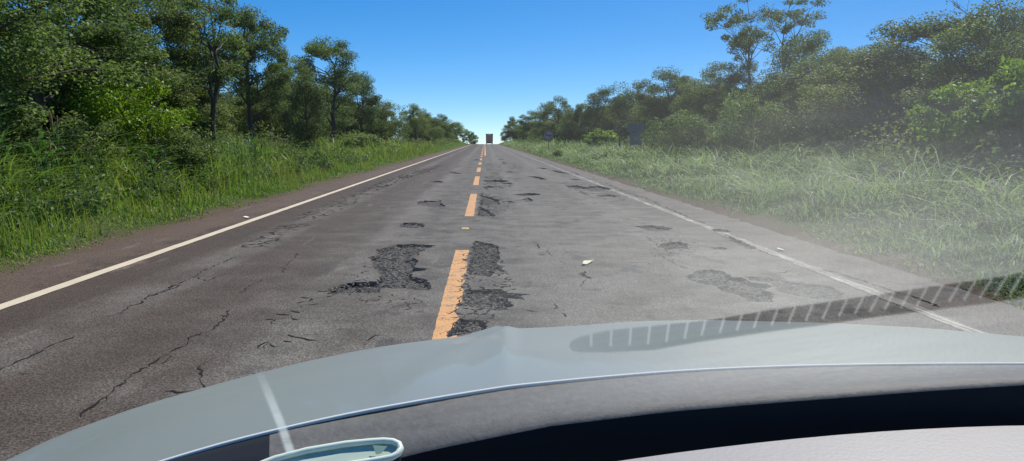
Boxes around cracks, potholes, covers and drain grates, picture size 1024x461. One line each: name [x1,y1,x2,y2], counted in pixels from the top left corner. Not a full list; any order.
crack [257,265,425,348]
pothole [463,289,531,310]
pothole [658,242,689,250]
crack [80,310,230,416]
pothole [328,244,437,295]
crack [0,336,74,374]
pothole [467,241,506,277]
